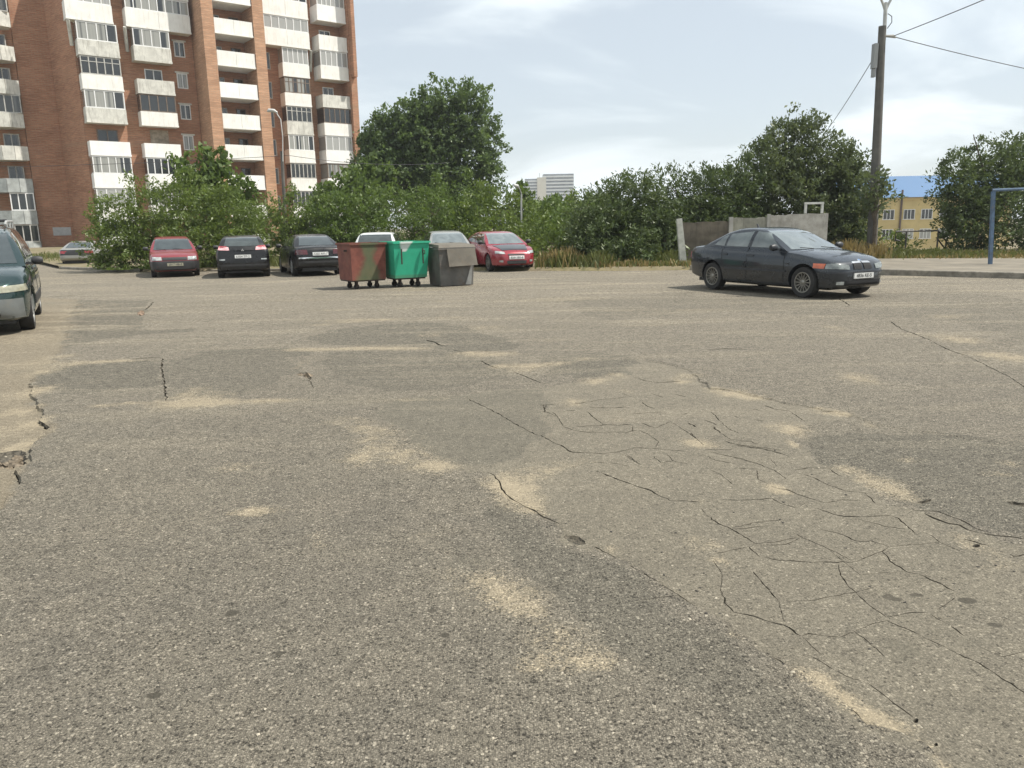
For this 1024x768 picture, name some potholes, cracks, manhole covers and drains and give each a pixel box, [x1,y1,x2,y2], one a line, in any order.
crack [541,394,804,484]
crack [596,468,1024,717]
pothole [0,450,28,469]
